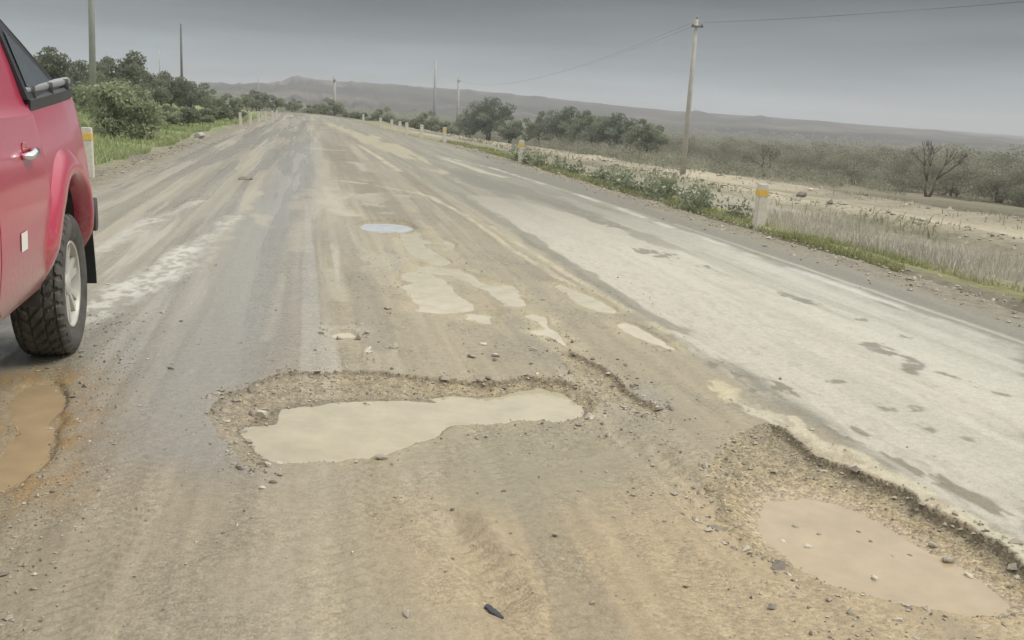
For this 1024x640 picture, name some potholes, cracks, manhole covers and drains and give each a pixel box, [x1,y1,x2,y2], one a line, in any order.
pothole [356,219,417,234]
pothole [207,371,599,469]
pothole [0,378,68,497]
pothole [703,423,1024,619]
